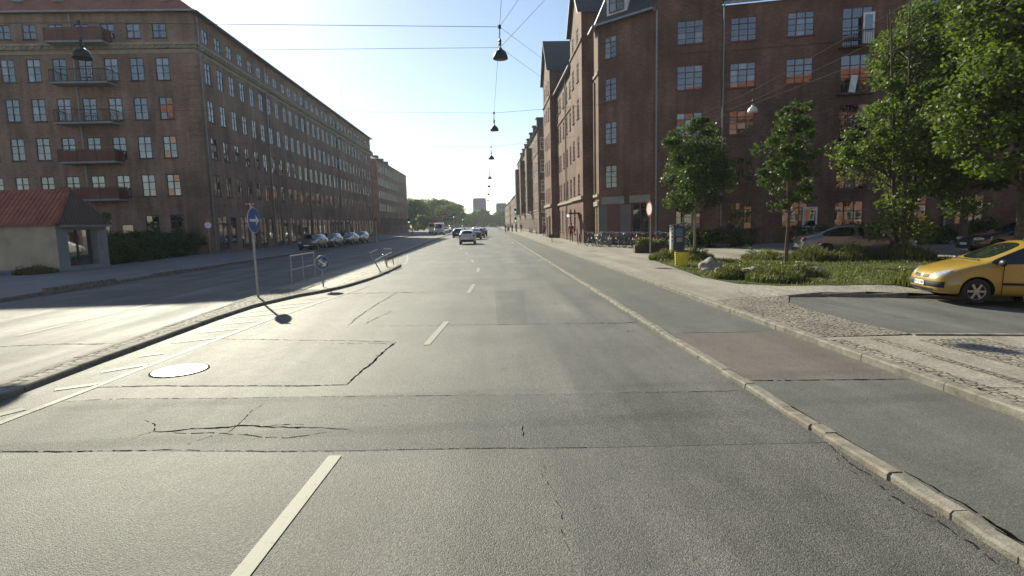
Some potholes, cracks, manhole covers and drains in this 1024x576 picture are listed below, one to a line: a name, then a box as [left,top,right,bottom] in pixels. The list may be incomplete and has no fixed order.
crack [831,446,1024,564]
crack [142,406,349,446]
manhole cover [148,363,210,378]
